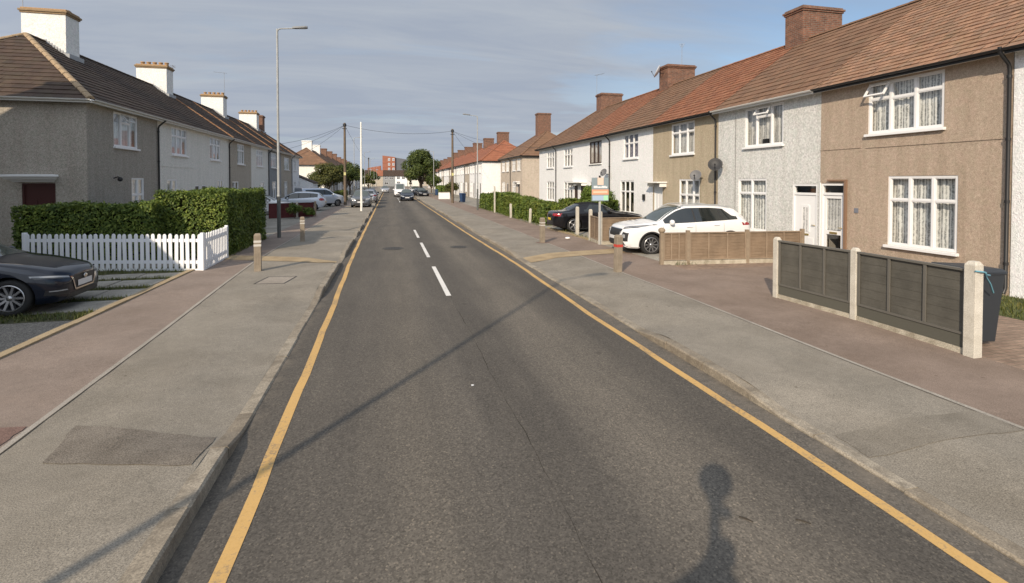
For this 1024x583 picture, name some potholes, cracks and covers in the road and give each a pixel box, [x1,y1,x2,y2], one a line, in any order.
utility cover [254,276,297,284]
